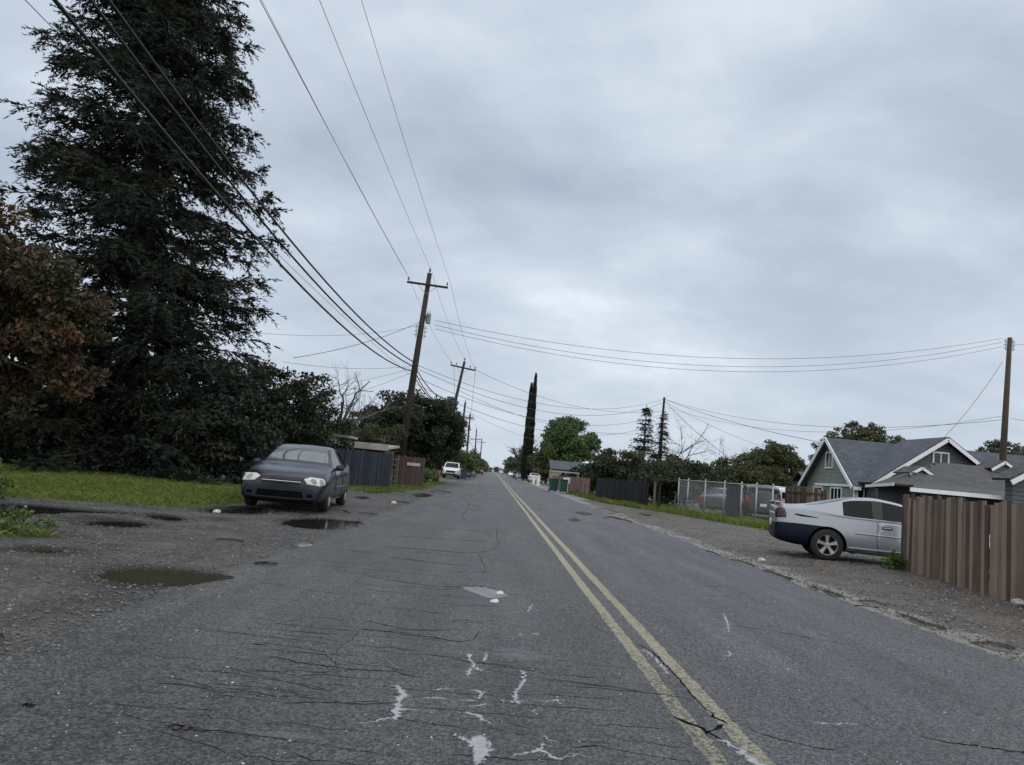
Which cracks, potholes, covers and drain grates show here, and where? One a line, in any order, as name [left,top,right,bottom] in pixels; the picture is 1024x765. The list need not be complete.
pothole [214,537,246,545]
pothole [78,519,149,527]
crack [32,501,1024,765]
pothole [0,545,66,554]
pothole [94,566,234,587]
pothole [196,506,274,514]
pothole [279,517,364,530]
